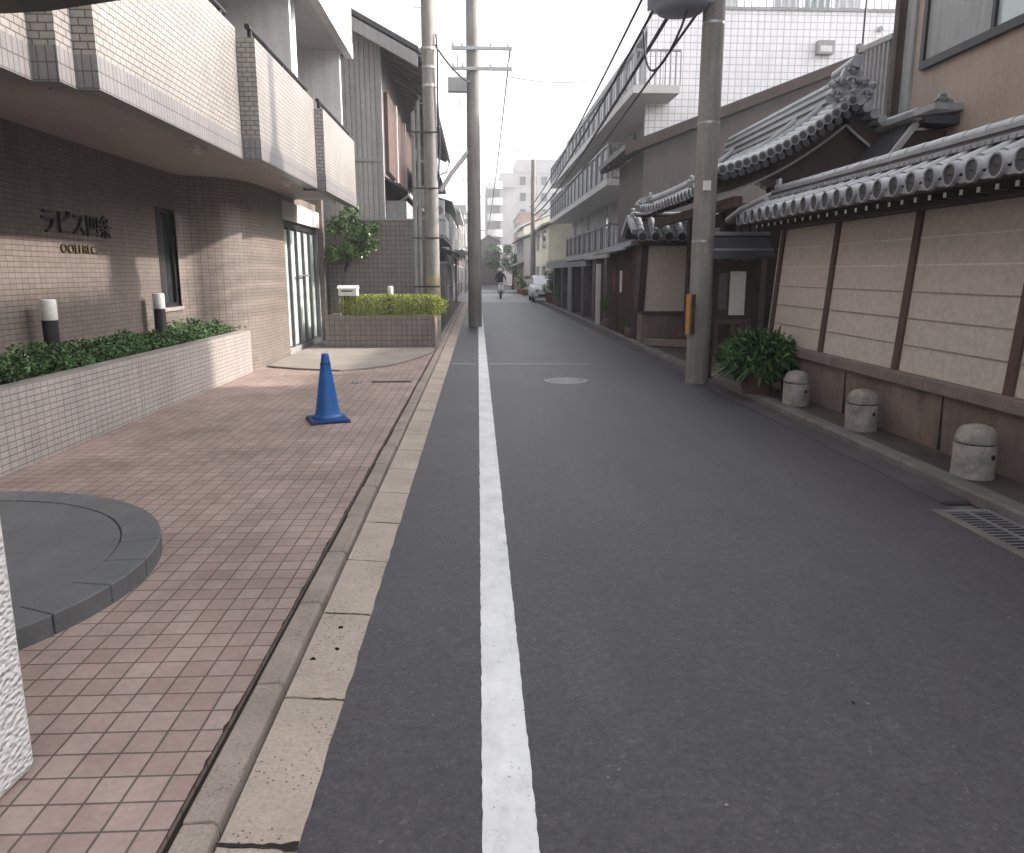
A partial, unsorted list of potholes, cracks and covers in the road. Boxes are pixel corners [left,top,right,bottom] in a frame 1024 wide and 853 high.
crack [215,841,300,852]
drain grate [931,509,1024,559]
